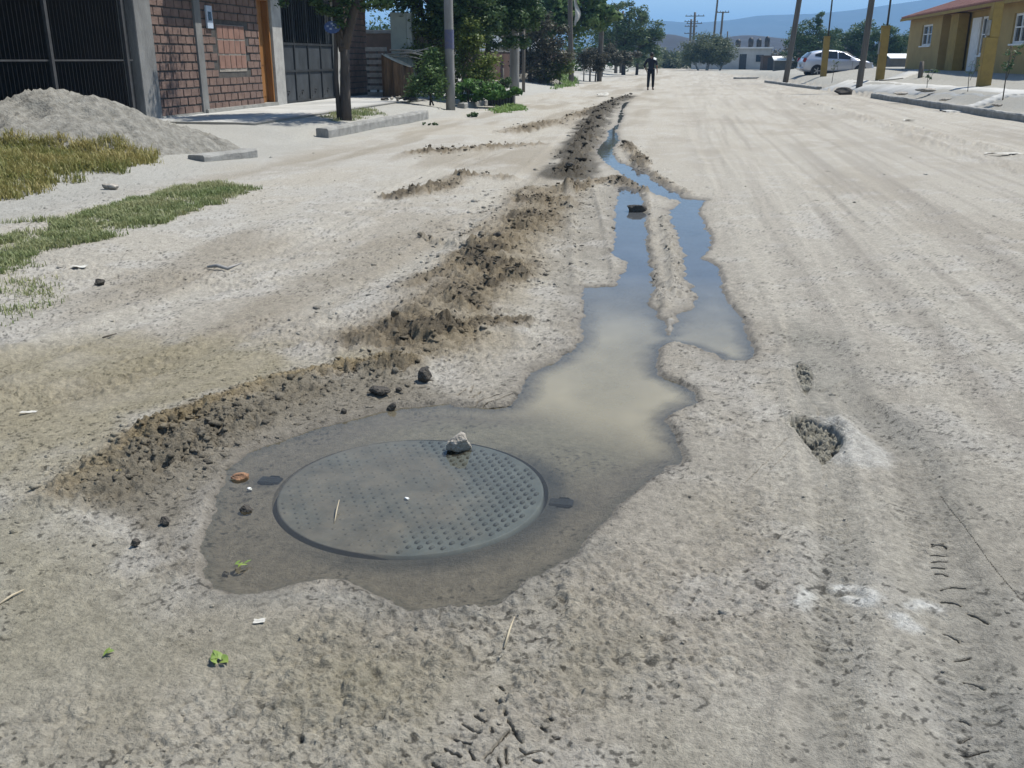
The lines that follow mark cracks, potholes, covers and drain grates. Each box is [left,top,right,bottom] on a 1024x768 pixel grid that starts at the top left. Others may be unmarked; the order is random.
pothole [784,411,849,467]
manhole cover [257,437,574,566]
pothole [792,361,817,397]
crack [942,497,1022,600]
